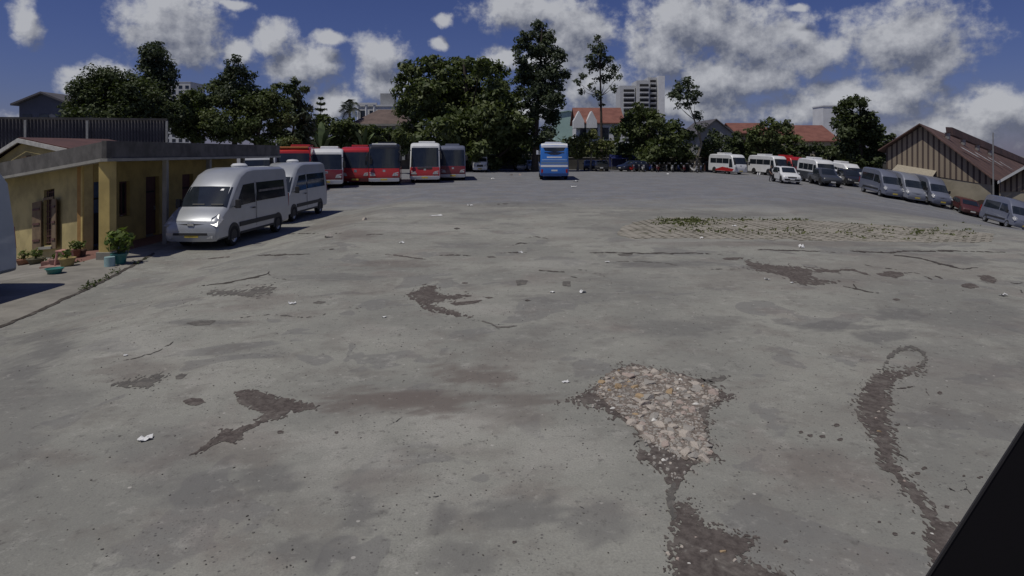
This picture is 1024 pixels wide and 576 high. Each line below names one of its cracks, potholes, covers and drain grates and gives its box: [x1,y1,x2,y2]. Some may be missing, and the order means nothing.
crack [202,272,286,286]
pothole [556,361,734,492]
crack [887,255,978,279]
